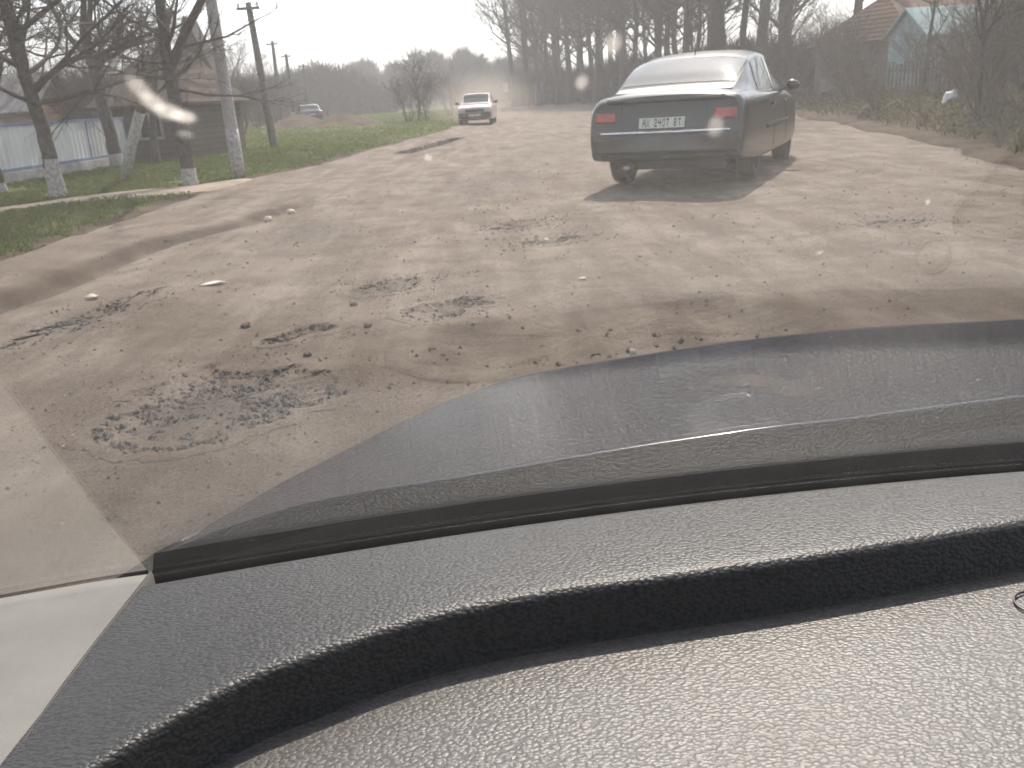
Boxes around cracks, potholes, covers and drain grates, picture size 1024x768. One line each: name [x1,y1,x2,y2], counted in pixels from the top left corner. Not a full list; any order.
pothole [509,233,595,248]
pothole [59,359,369,463]
pothole [377,136,477,156]
pothole [0,283,185,355]
pothole [479,217,558,232]
pothole [336,275,436,298]
pothole [244,319,354,349]
pothole [855,217,953,227]
